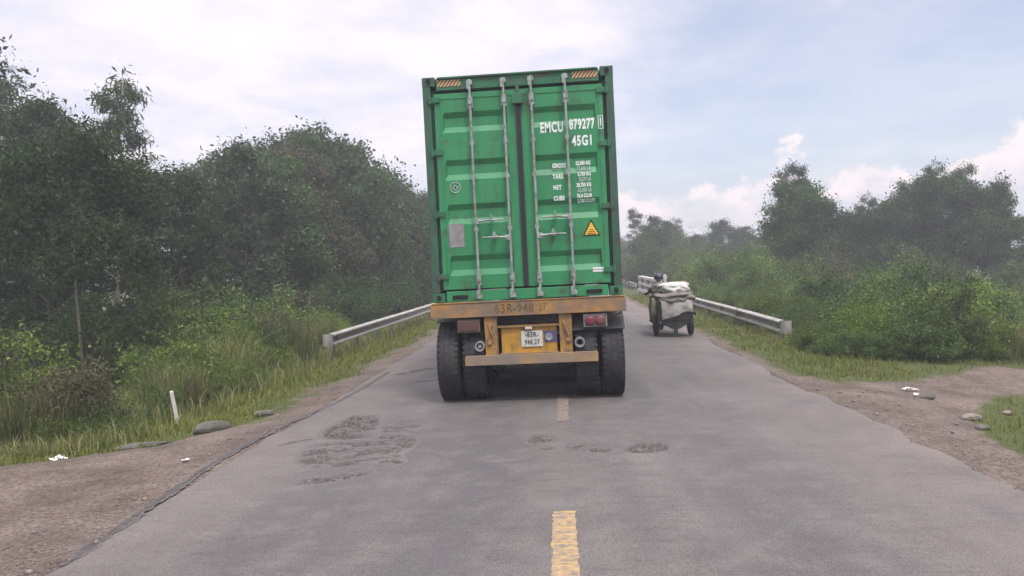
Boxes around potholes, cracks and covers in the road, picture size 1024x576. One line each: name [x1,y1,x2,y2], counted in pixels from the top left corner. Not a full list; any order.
pothole [621,441,674,454]
pothole [288,469,380,486]
pothole [320,414,383,441]
